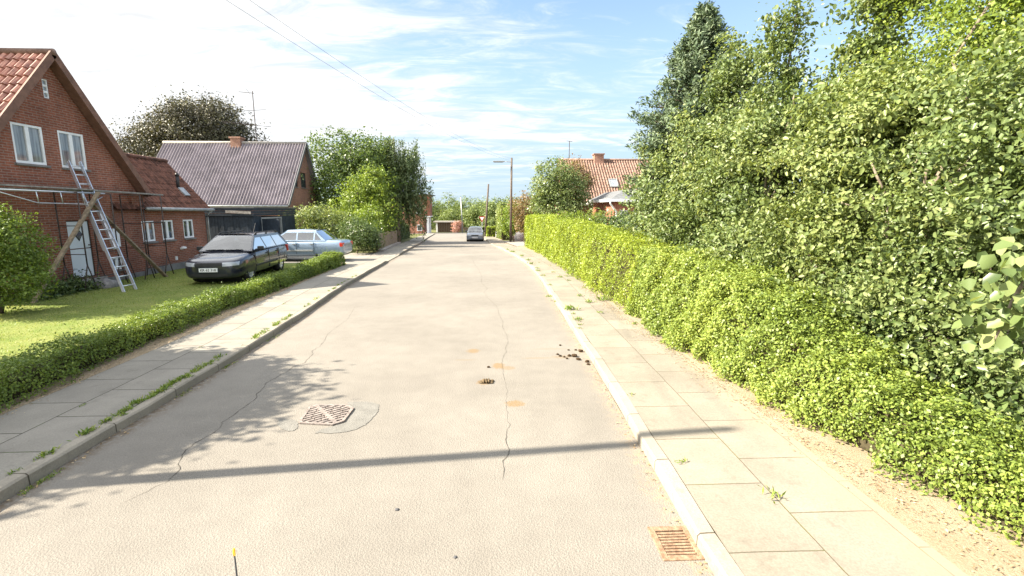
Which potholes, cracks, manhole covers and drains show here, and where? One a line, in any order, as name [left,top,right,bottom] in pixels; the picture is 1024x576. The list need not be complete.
drain grate [647,526,705,561]
crack [129,307,355,500]
